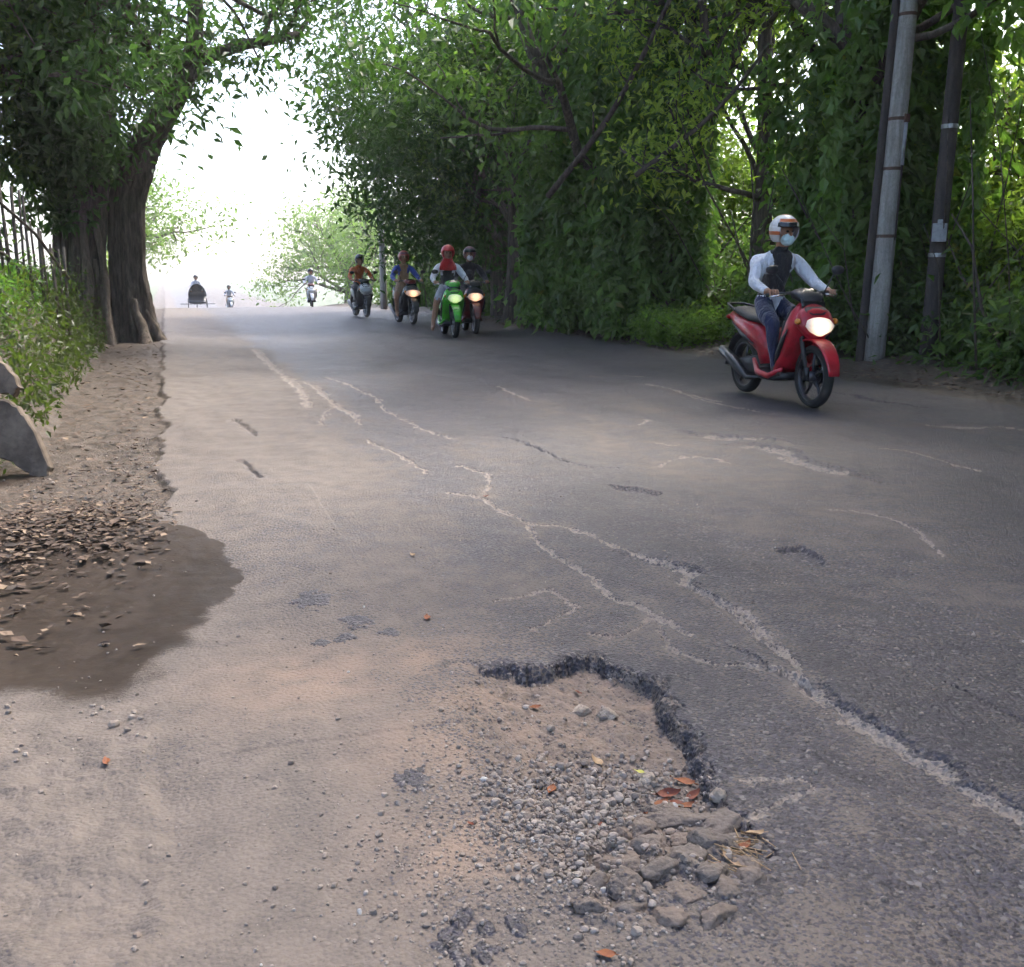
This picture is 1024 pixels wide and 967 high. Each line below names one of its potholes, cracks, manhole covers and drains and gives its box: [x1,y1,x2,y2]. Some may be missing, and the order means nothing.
pothole [435,653,774,964]
pothole [773,544,831,568]
crack [226,348,1024,834]
pothole [602,483,664,498]
